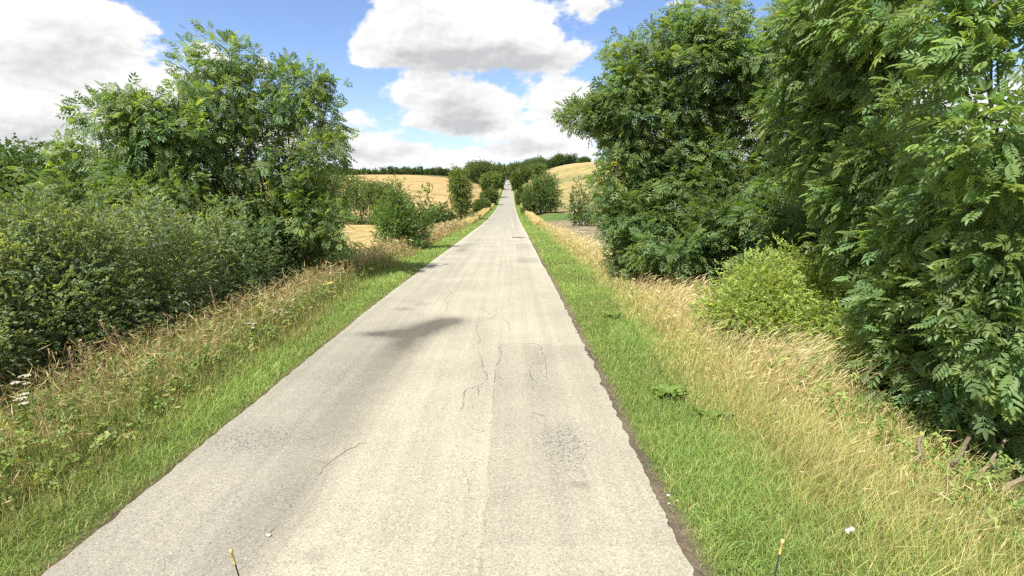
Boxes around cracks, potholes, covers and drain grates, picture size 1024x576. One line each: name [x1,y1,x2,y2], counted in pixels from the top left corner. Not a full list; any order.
crack [461,308,548,409]
